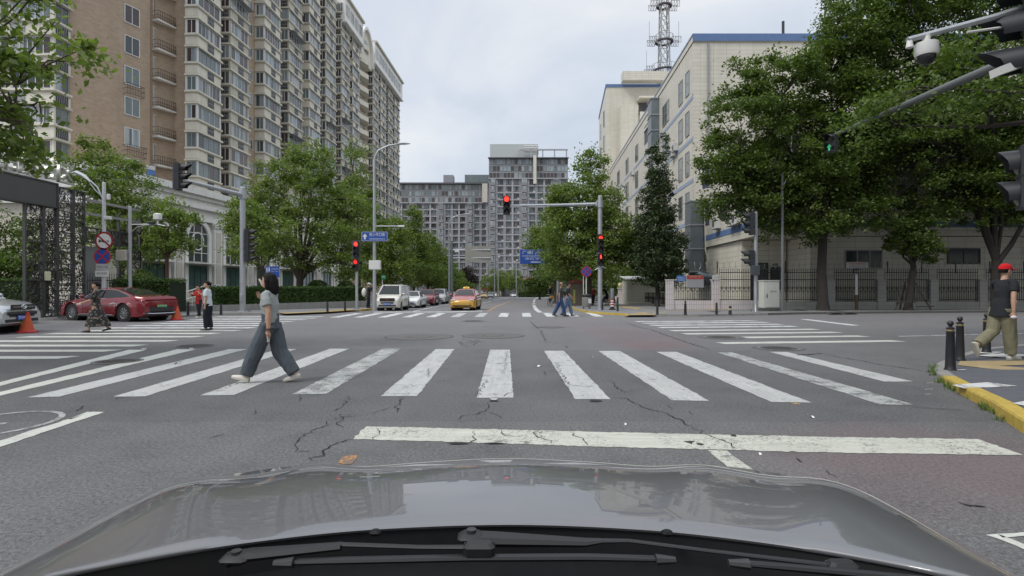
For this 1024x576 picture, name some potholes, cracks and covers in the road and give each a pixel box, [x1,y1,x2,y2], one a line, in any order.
crack [457,352,552,443]
crack [614,384,733,447]
crack [294,396,354,461]
